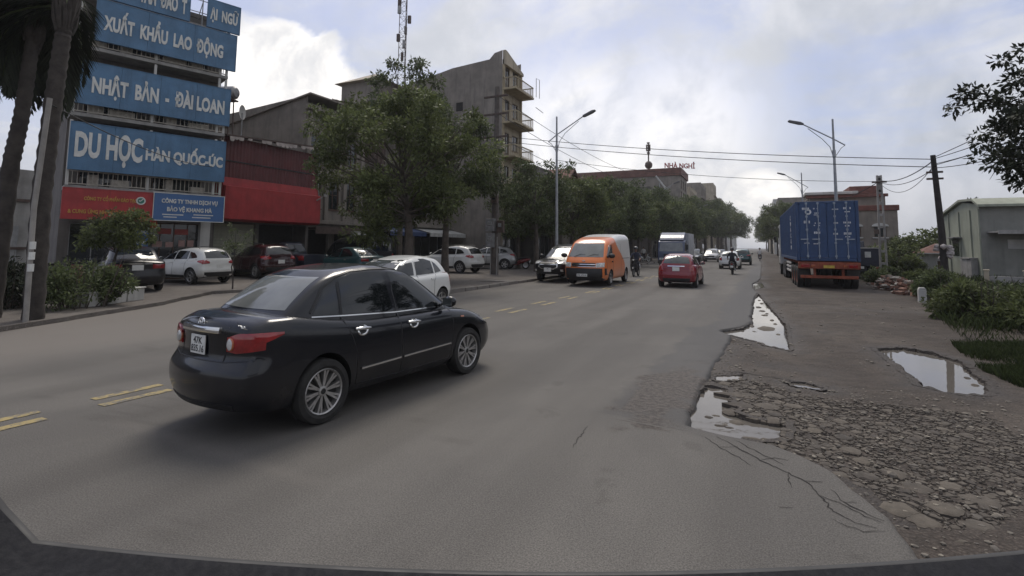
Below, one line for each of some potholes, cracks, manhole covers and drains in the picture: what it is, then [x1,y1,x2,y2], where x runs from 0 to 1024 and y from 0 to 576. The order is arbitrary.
pothole [711,373,747,382]
pothole [688,383,796,443]
crack [707,371,1024,544]
pothole [723,294,794,351]
pothole [870,346,999,396]
pothole [786,381,829,391]
